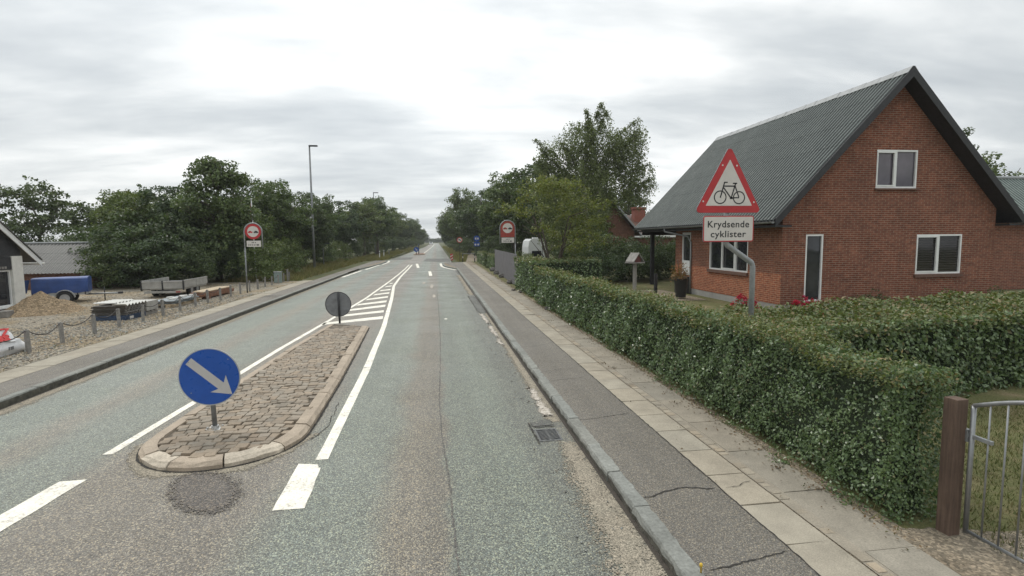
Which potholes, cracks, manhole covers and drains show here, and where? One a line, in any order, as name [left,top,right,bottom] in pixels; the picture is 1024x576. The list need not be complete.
crack [711,551,785,570]
drain grate [534,428,563,442]
crack [643,481,747,498]
